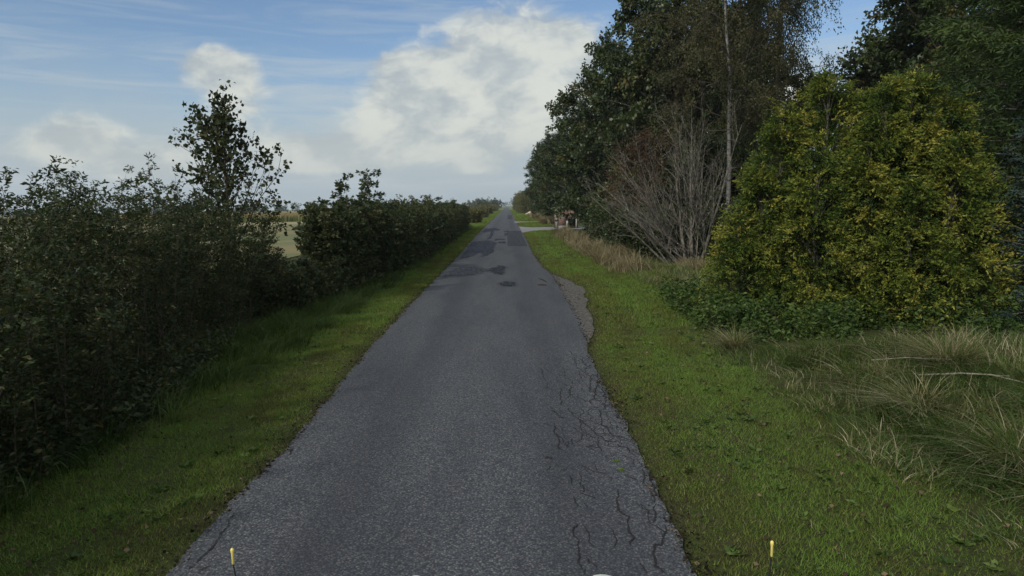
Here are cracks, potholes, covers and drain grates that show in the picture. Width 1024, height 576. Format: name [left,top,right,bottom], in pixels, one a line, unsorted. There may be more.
crack [189,512,235,571]
crack [535,351,675,574]
